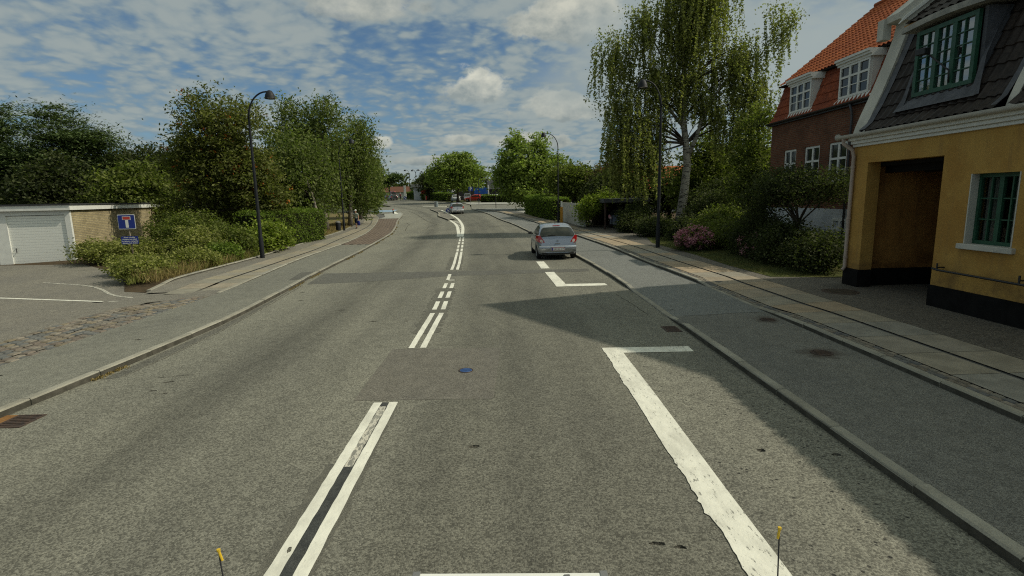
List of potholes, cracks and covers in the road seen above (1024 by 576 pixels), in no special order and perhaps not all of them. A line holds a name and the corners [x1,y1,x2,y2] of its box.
drain grate [0,414,47,428]
